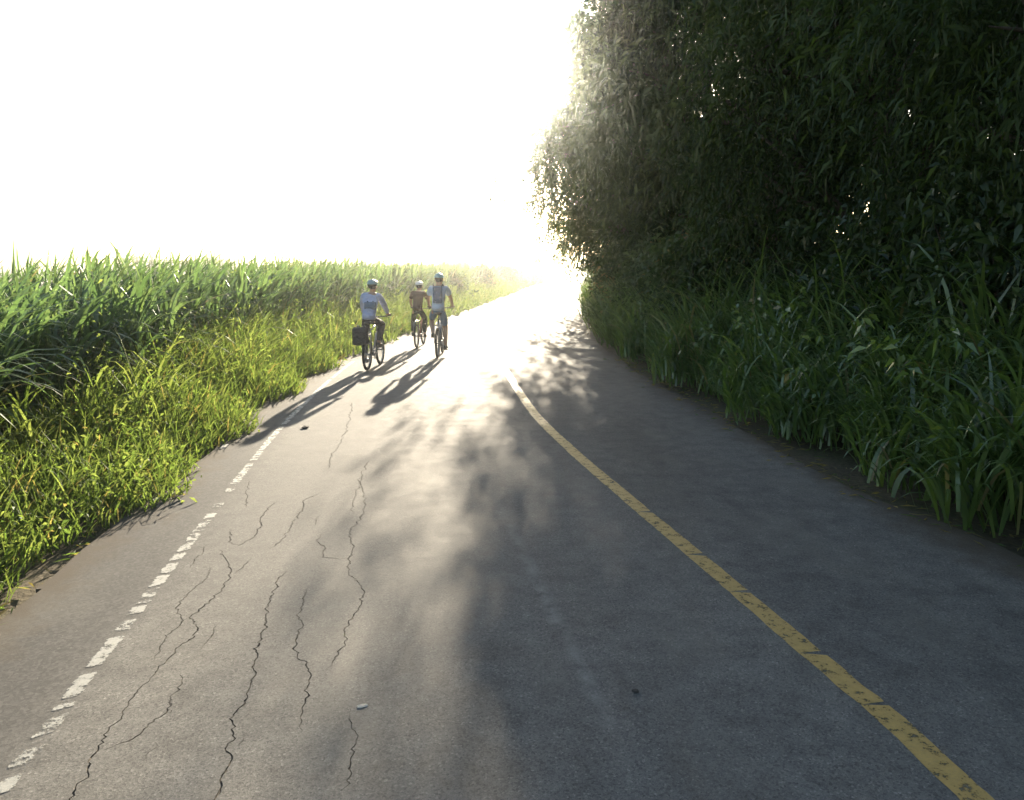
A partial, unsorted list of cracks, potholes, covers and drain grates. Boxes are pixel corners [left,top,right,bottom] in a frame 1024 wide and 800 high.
crack [69,482,317,800]
crack [341,709,359,791]
crack [316,462,368,669]
